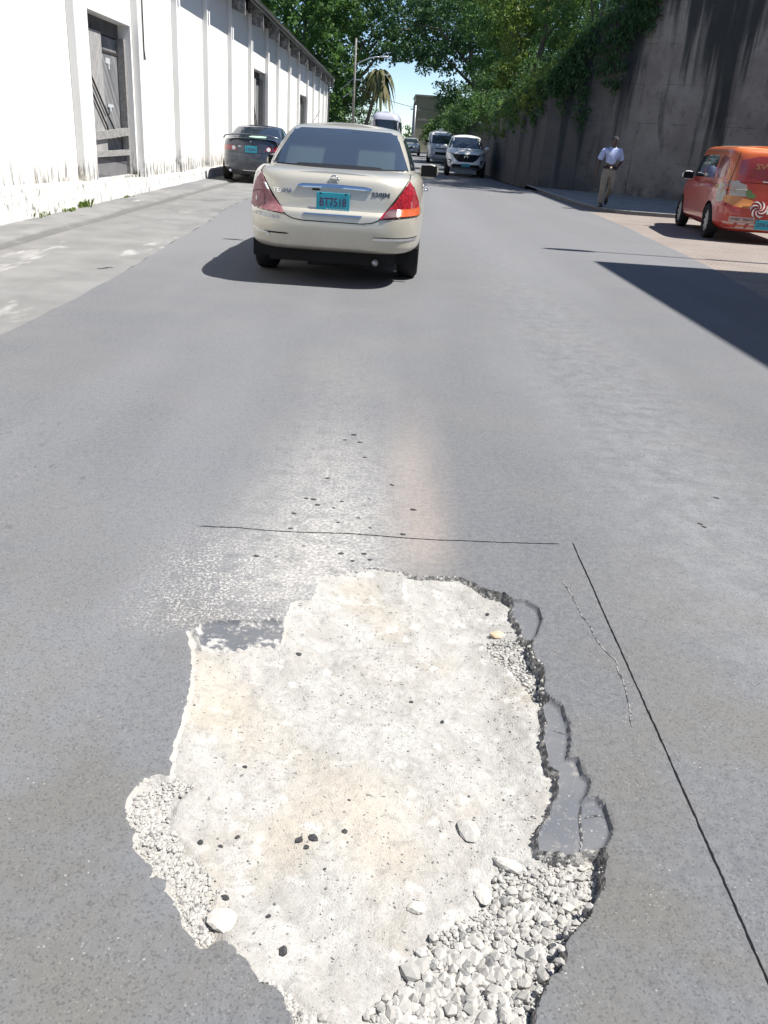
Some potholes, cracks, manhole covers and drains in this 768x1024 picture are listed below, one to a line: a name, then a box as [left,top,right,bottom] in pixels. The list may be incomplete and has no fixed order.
crack [563,582,632,724]
pothole [125,567,614,1024]
